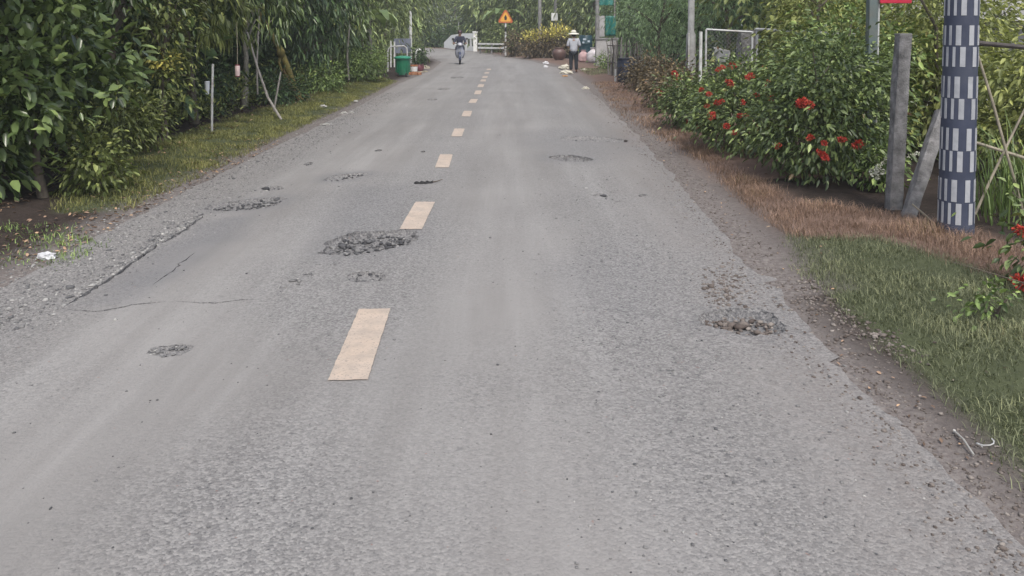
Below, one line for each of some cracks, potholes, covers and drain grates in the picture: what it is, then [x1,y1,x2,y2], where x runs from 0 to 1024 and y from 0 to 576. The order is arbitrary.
crack [67,218,251,312]
pothole [322,173,368,181]
pothole [318,230,419,256]
pothole [347,271,387,282]
pothole [204,196,287,211]
pothole [146,344,194,358]
pothole [698,308,787,336]
